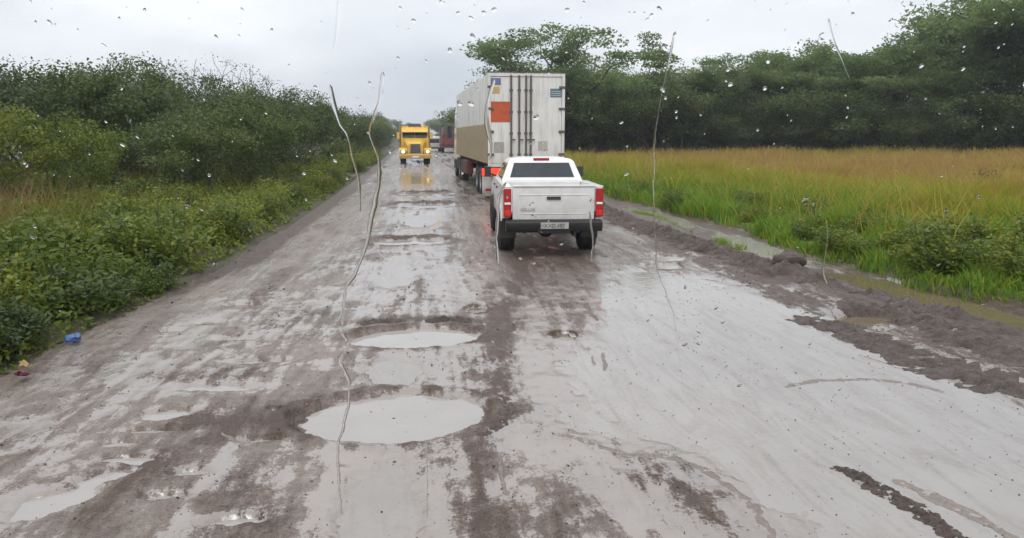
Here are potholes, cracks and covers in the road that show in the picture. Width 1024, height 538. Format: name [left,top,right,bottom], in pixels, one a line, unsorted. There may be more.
pothole [259,384,515,456]
pothole [327,322,506,352]
pothole [546,330,583,339]
